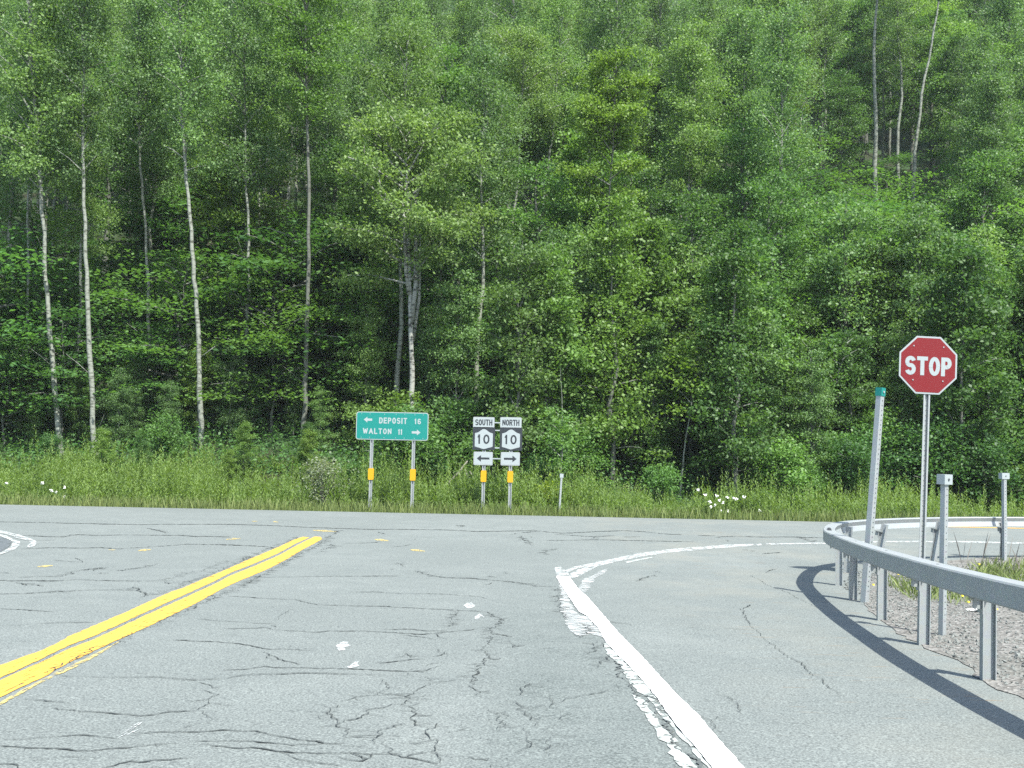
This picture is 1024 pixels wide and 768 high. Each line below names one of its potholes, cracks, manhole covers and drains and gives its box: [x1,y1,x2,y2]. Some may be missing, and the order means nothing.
crack [734,605,838,693]
crack [0,528,703,768]
